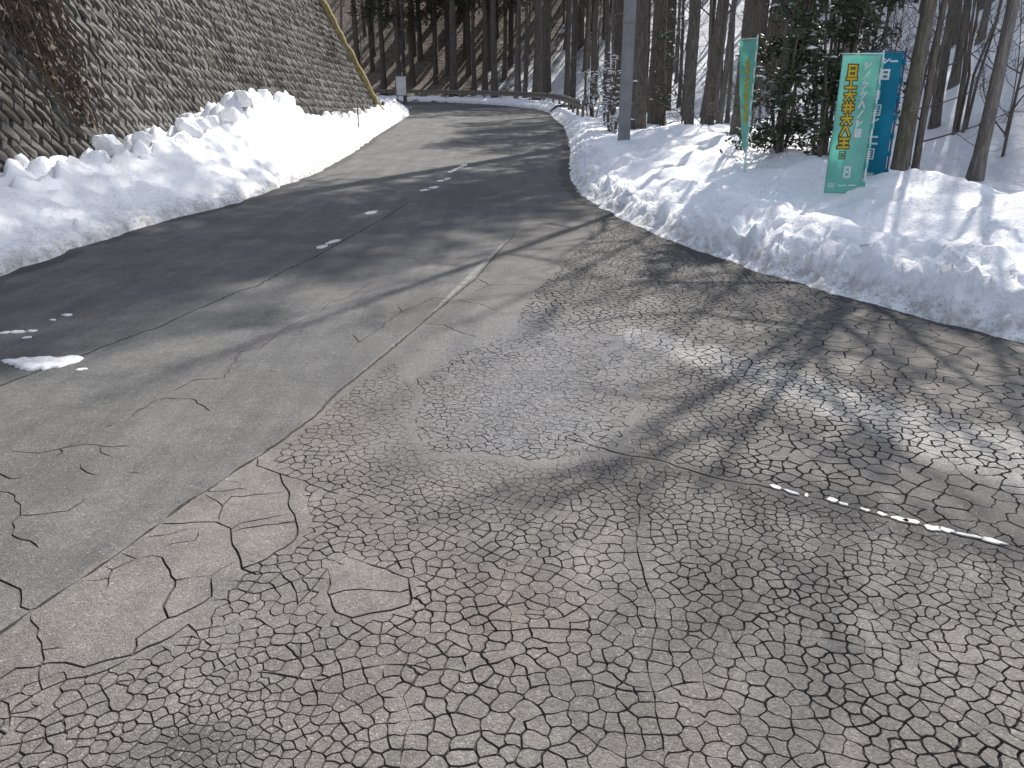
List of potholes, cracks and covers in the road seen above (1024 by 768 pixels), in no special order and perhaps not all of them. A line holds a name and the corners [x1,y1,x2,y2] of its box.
crack [0,208,1024,768]
